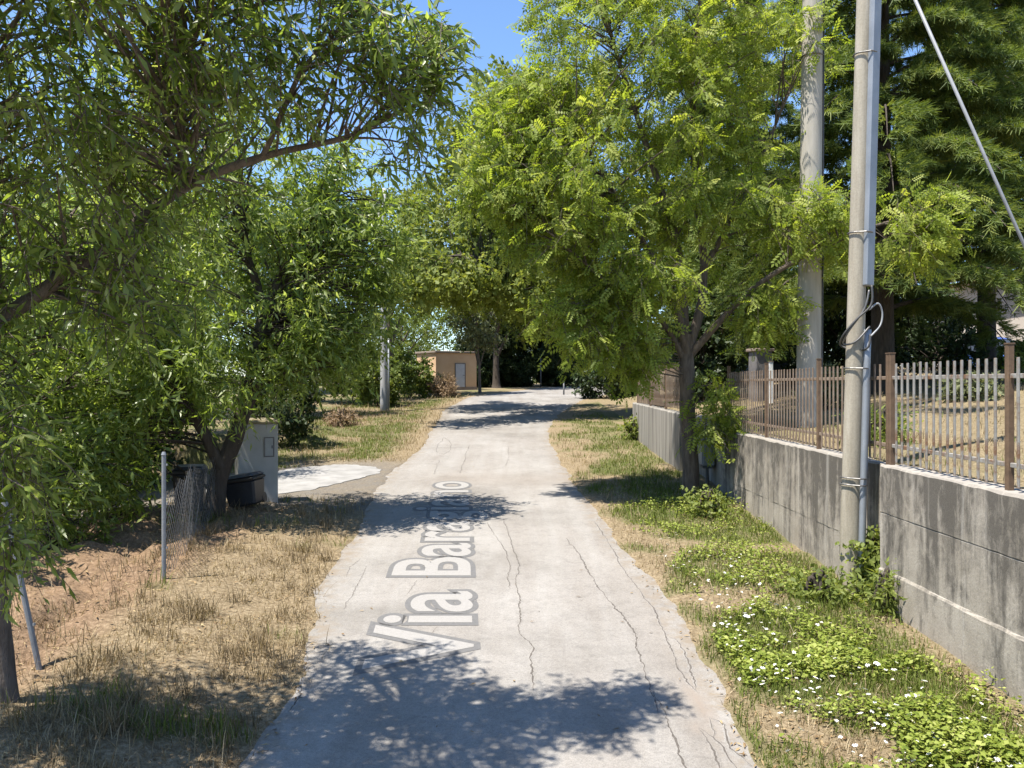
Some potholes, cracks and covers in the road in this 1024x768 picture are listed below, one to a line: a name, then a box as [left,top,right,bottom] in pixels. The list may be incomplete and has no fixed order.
crack [487,519,536,690]
crack [566,522,753,768]
crack [434,438,470,474]
crack [344,559,366,609]
